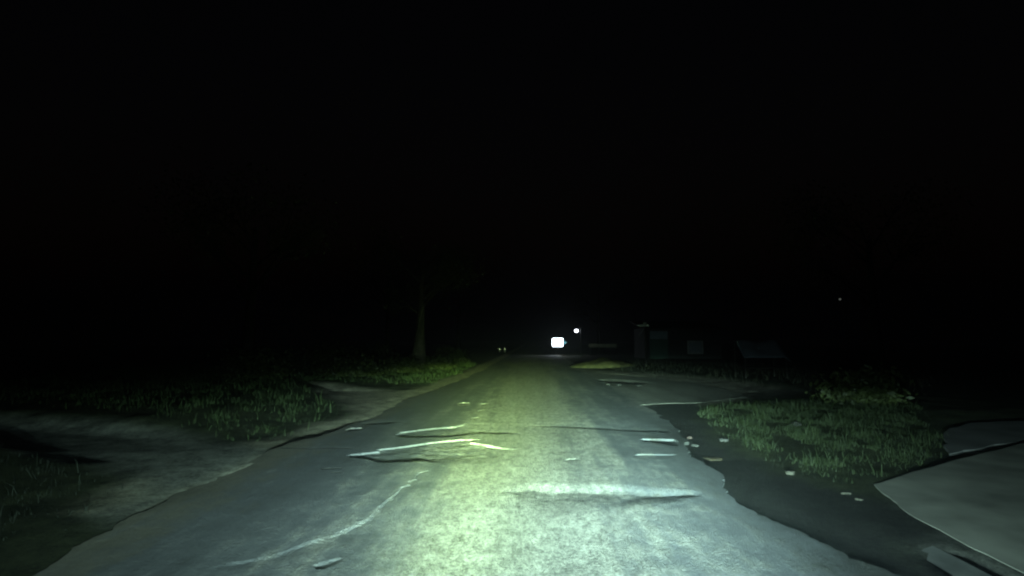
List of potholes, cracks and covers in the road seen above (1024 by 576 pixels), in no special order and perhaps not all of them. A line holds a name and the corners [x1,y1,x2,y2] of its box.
crack [522,420,672,453]
